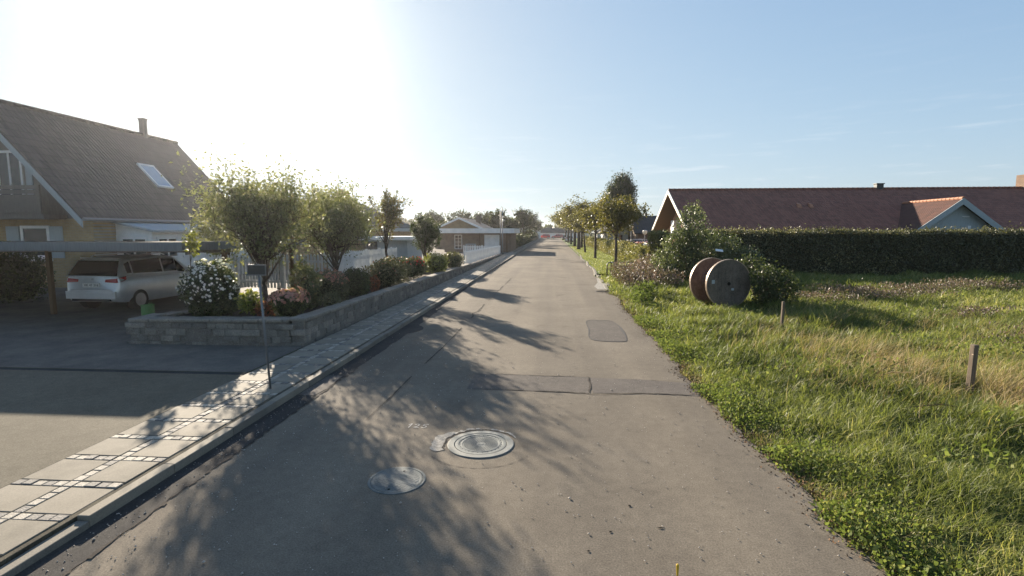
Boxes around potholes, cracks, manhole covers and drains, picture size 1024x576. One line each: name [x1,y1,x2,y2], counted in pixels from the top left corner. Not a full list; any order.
manhole cover [447,431,514,459]
manhole cover [368,467,426,495]
